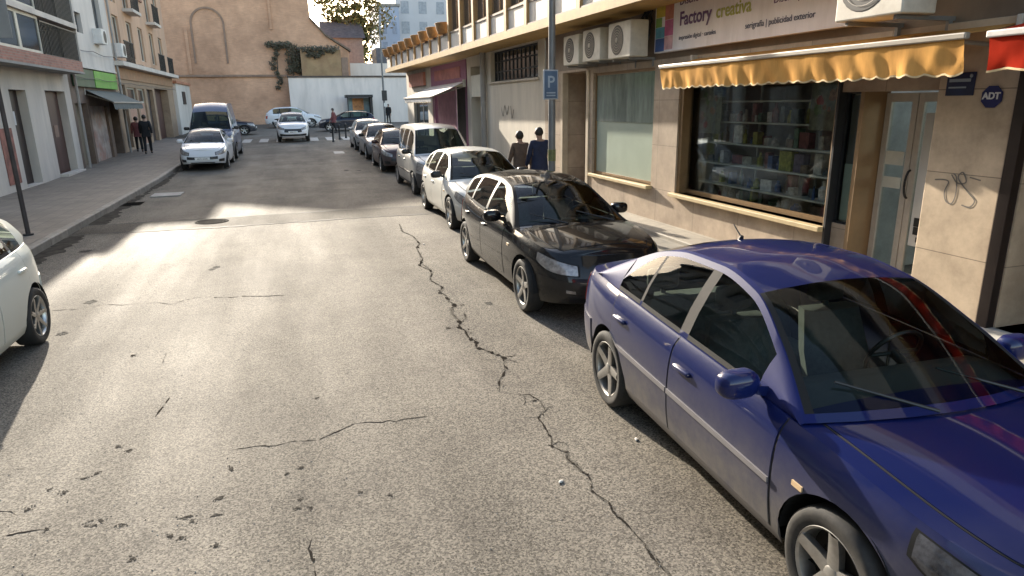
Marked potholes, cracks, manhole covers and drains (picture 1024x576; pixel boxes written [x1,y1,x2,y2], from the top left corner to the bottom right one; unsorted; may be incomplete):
crack [308,539,316,576]
crack [234,416,425,450]
crack [399,224,672,576]
